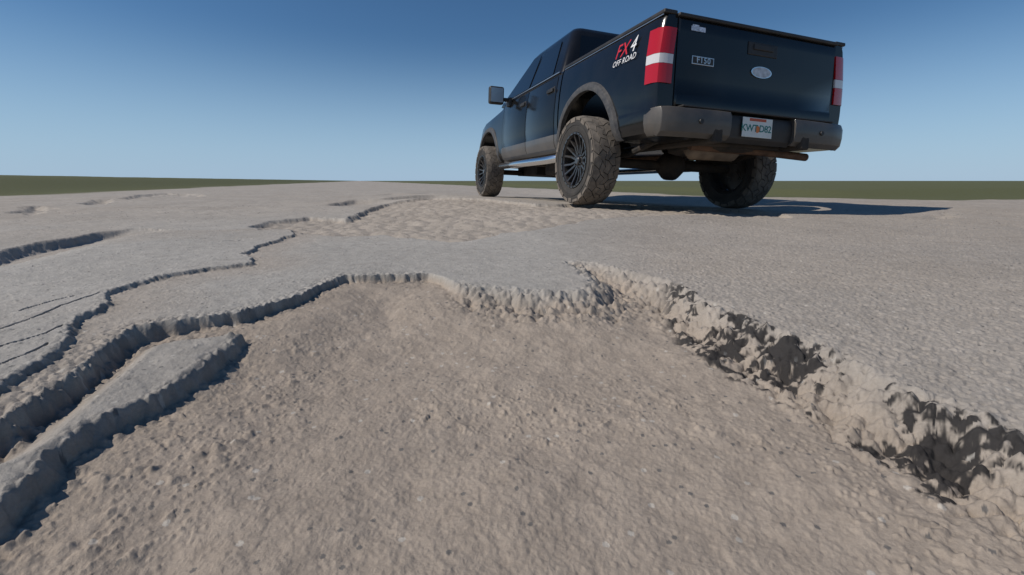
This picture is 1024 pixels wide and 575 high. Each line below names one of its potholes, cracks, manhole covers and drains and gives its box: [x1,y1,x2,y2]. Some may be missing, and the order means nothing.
crack [0,233,298,395]
pothole [247,197,795,242]
pothole [3,205,62,216]
pothole [0,260,1024,575]
